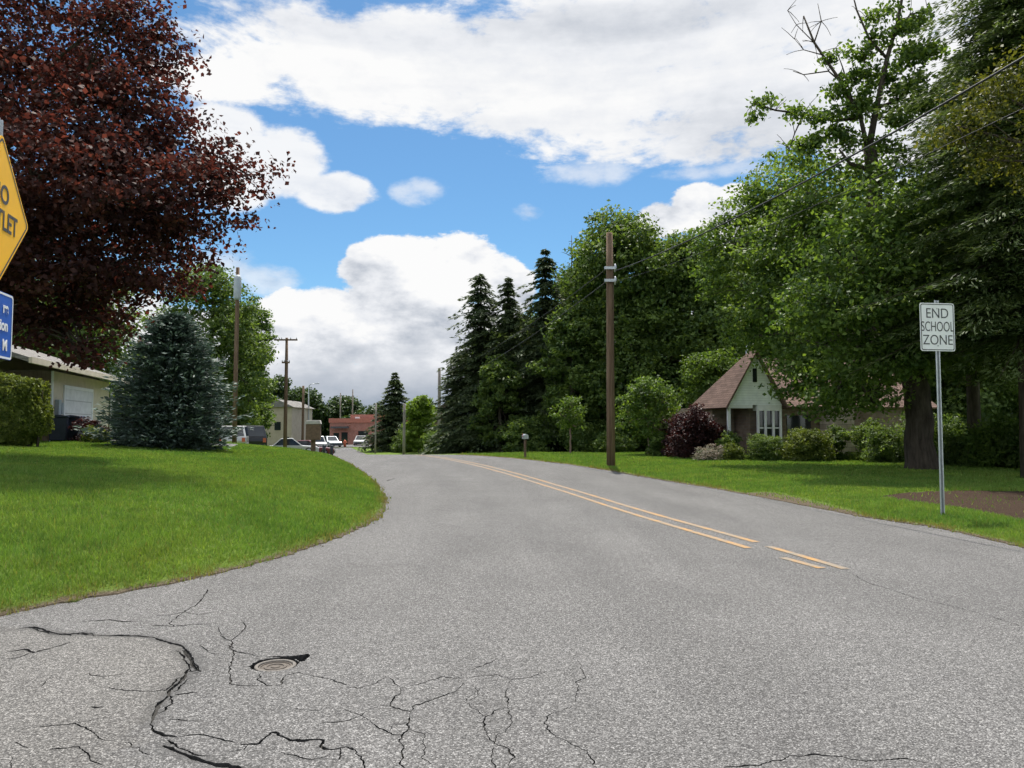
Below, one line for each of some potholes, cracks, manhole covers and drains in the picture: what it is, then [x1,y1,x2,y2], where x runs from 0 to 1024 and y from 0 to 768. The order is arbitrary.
crack [724,753,927,768]
manhole cover [249,658,299,672]
crack [544,661,597,768]
crack [4,589,544,768]
